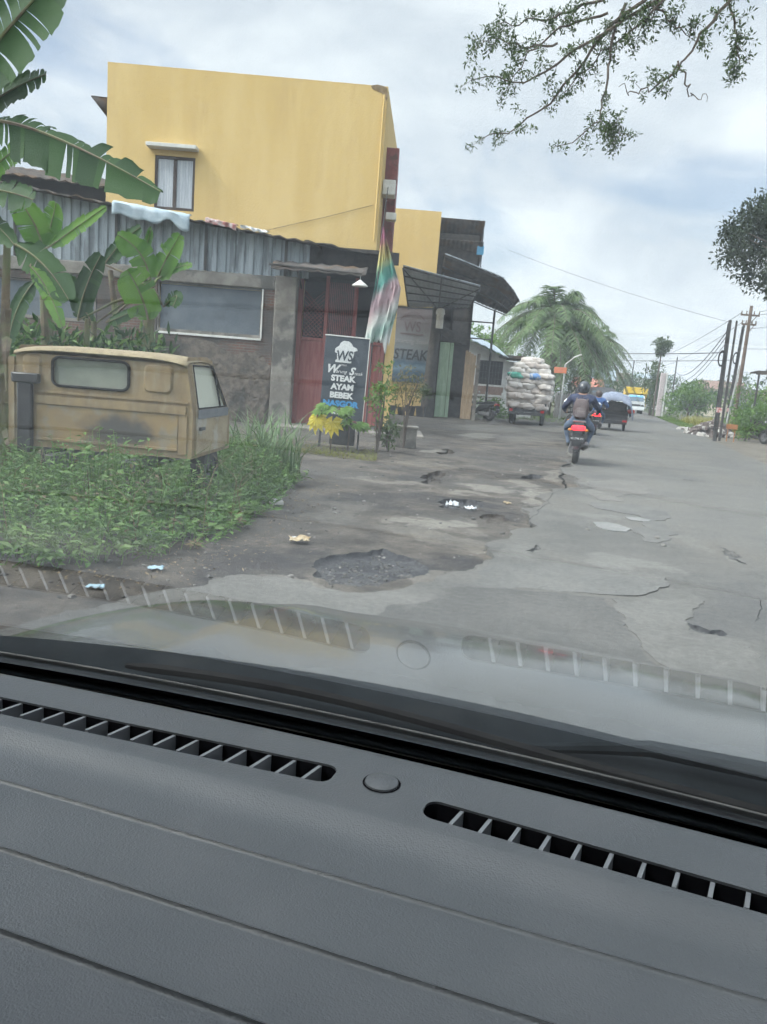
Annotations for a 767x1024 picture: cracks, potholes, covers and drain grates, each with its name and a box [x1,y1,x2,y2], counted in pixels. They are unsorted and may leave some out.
crack [490,463,571,527]
pothole [438,499,485,511]
pothole [480,514,509,523]
pothole [421,471,447,484]
pothole [312,548,430,587]
